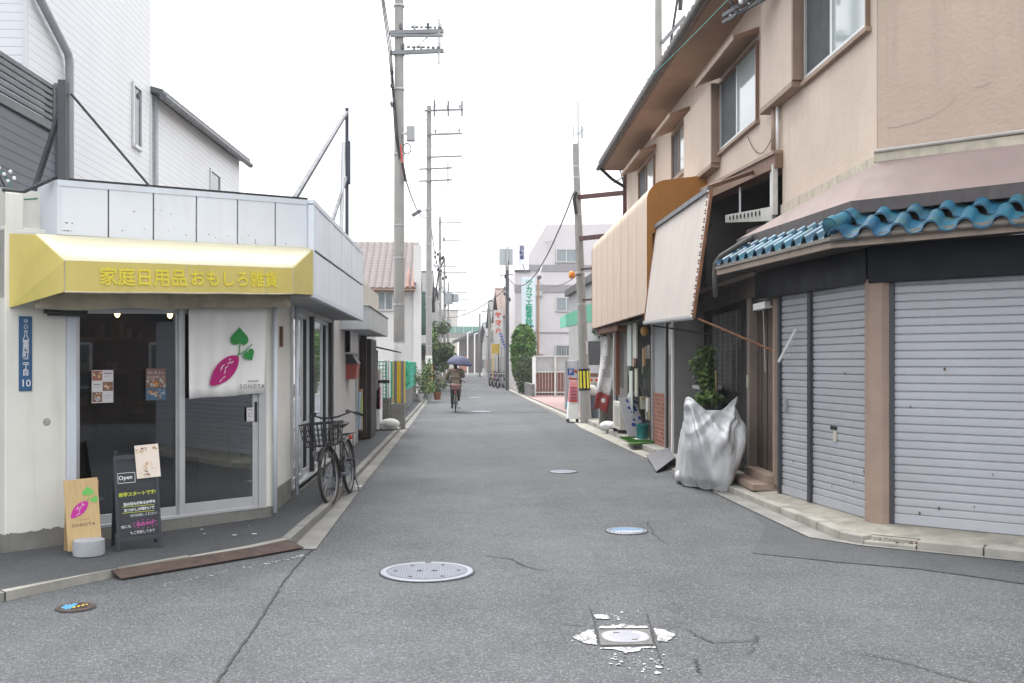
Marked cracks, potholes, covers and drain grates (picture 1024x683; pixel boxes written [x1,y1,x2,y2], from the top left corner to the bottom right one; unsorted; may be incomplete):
crack [215,549,359,683]
manhole cover [379,562,475,583]
crack [664,626,759,675]
manhole cover [54,602,97,613]
manhole cover [598,629,653,647]
manhole cover [605,527,649,535]
